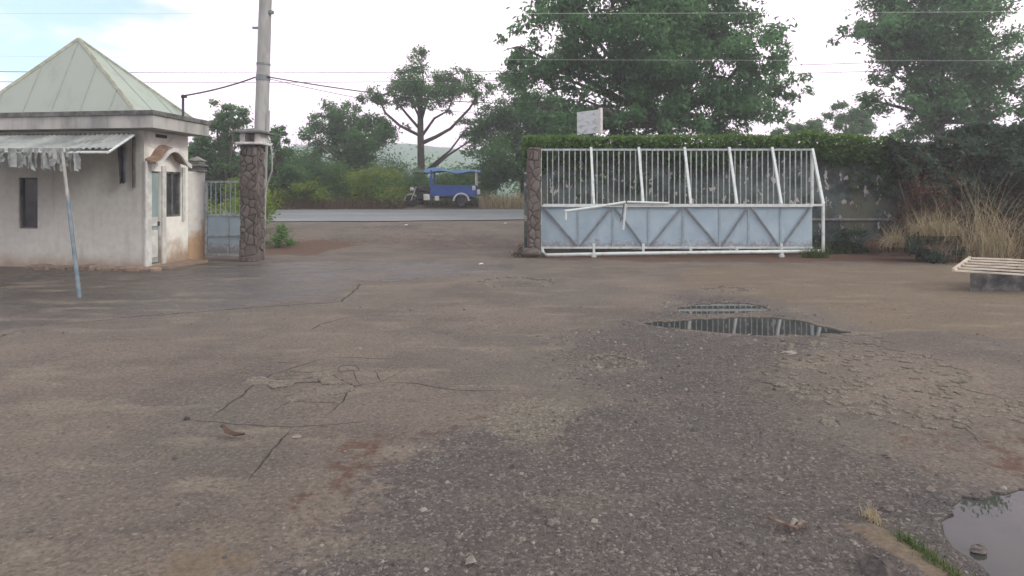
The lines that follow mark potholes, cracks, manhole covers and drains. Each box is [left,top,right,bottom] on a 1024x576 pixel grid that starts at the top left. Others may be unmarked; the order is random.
pothole [939,488,1024,576]
crack [190,357,497,481]
crack [51,284,371,331]
pothole [675,302,769,314]
crack [753,333,1024,444]
pothole [643,316,852,336]
